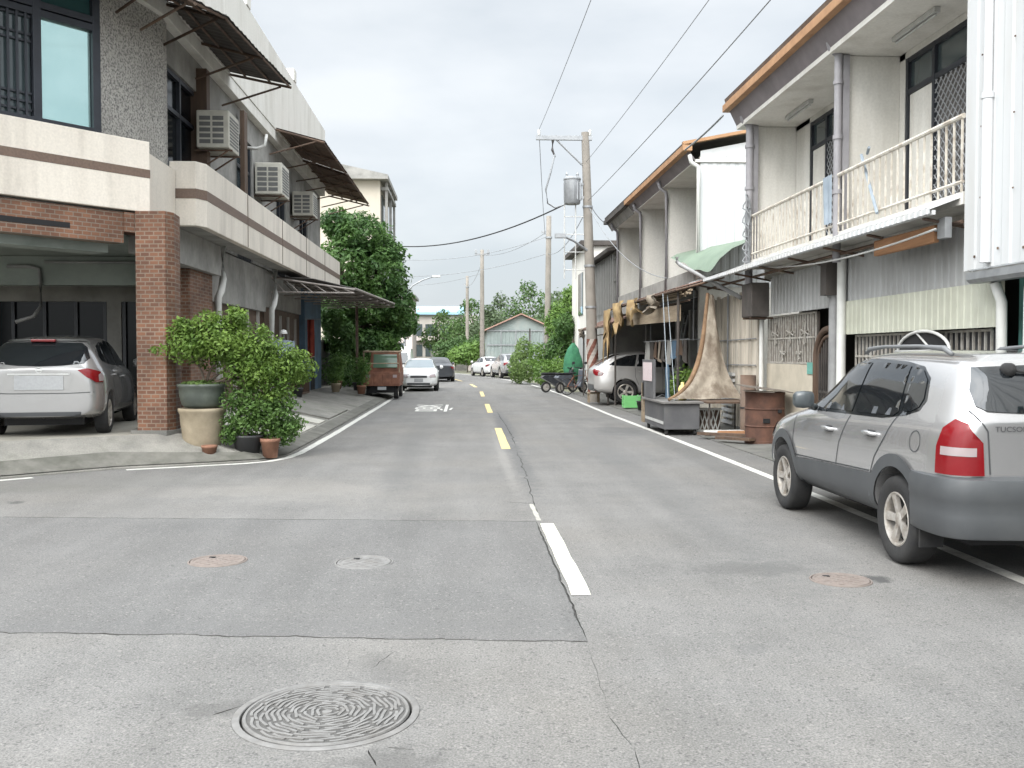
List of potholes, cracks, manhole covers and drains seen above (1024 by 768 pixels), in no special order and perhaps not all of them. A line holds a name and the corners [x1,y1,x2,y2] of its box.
manhole cover [334,555,393,569]
manhole cover [231,681,420,752]
manhole cover [187,554,248,567]
manhole cover [809,572,873,588]
crack [3,416,640,768]
